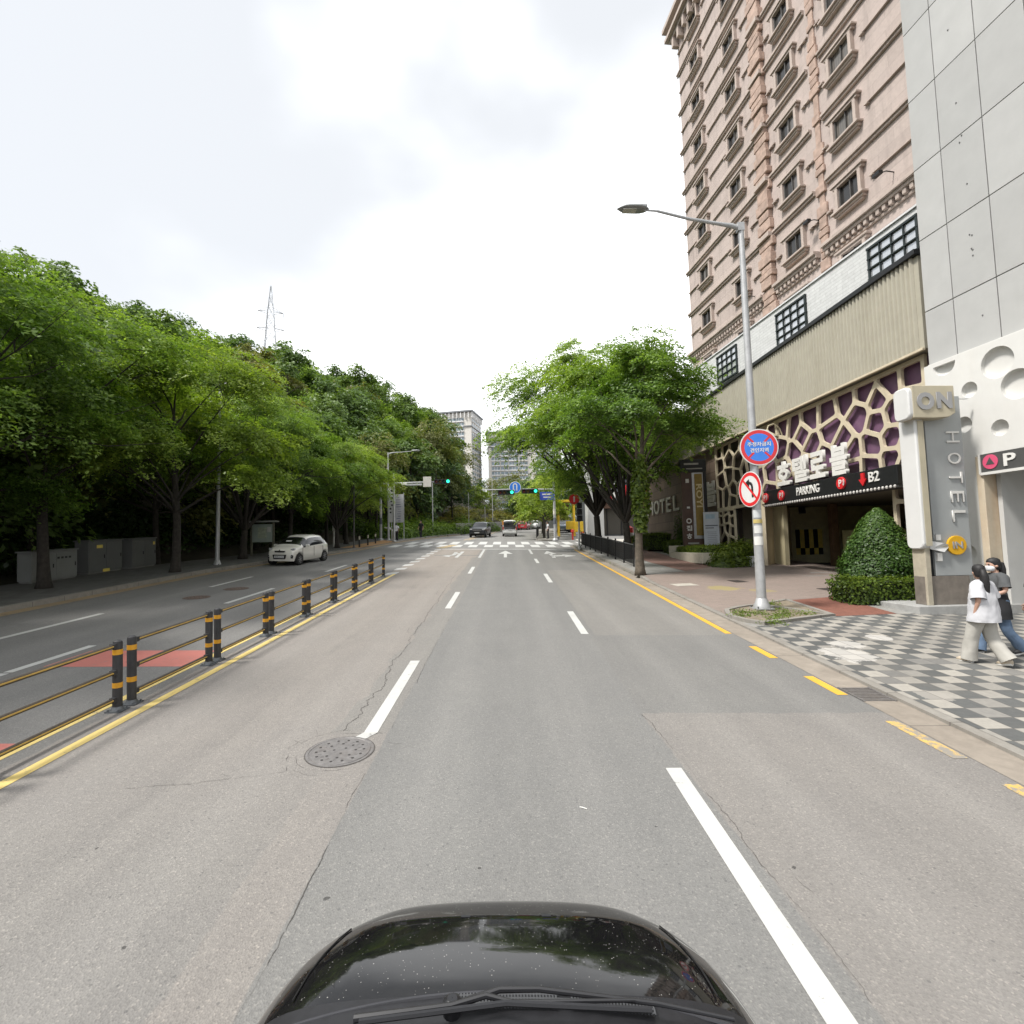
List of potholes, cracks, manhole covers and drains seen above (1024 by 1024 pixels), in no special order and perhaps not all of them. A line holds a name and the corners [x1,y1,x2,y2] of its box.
manhole cover [304,736,375,768]
crack [283,569,459,777]
drain grate [837,687,898,702]
